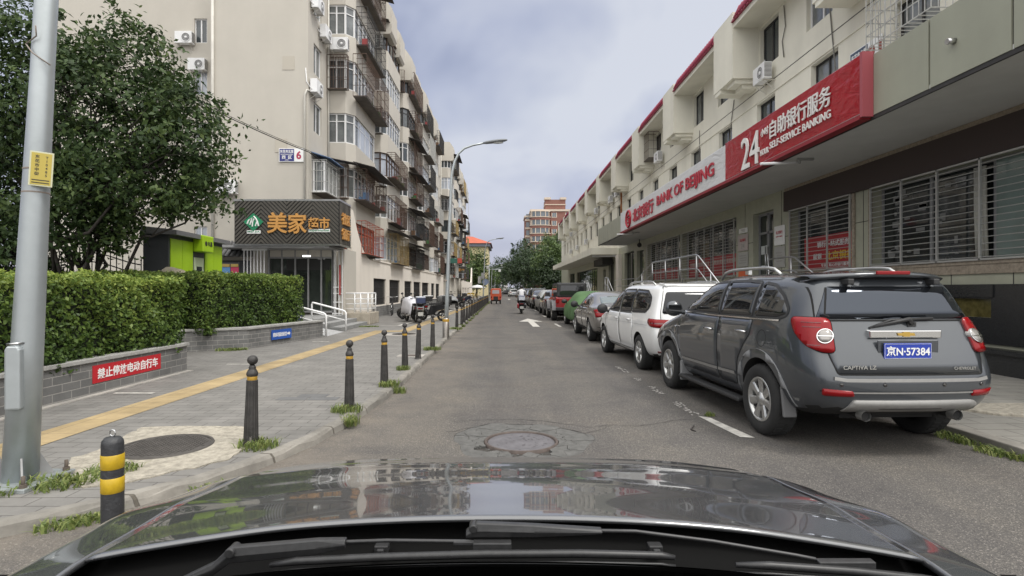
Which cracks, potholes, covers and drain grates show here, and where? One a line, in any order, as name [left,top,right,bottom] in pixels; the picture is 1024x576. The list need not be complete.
manhole cover [484,431,558,455]
manhole cover [124,434,215,460]
